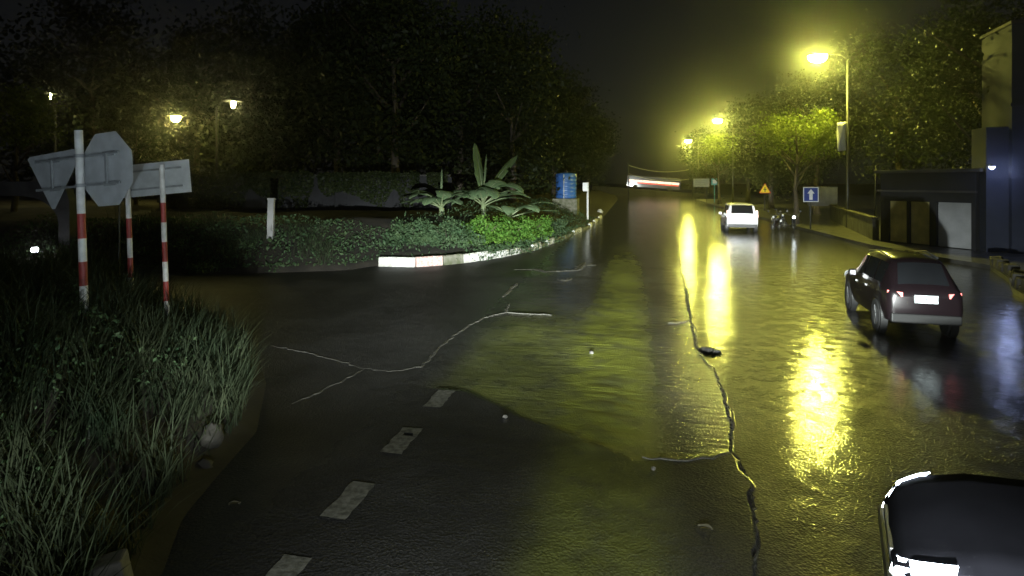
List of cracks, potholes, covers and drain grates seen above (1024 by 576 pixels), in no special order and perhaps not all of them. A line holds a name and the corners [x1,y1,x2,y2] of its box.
crack [275,262,596,404]
crack [642,242,759,576]
